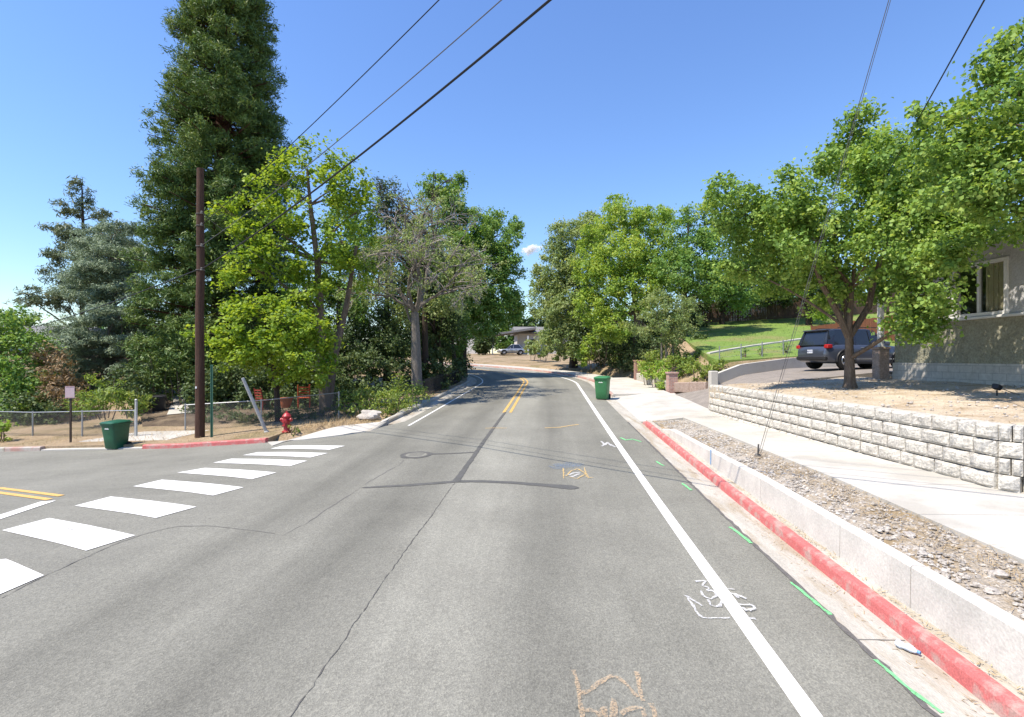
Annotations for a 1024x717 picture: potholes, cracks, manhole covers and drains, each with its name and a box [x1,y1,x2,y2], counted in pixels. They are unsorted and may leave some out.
crack [1,526,270,598]
